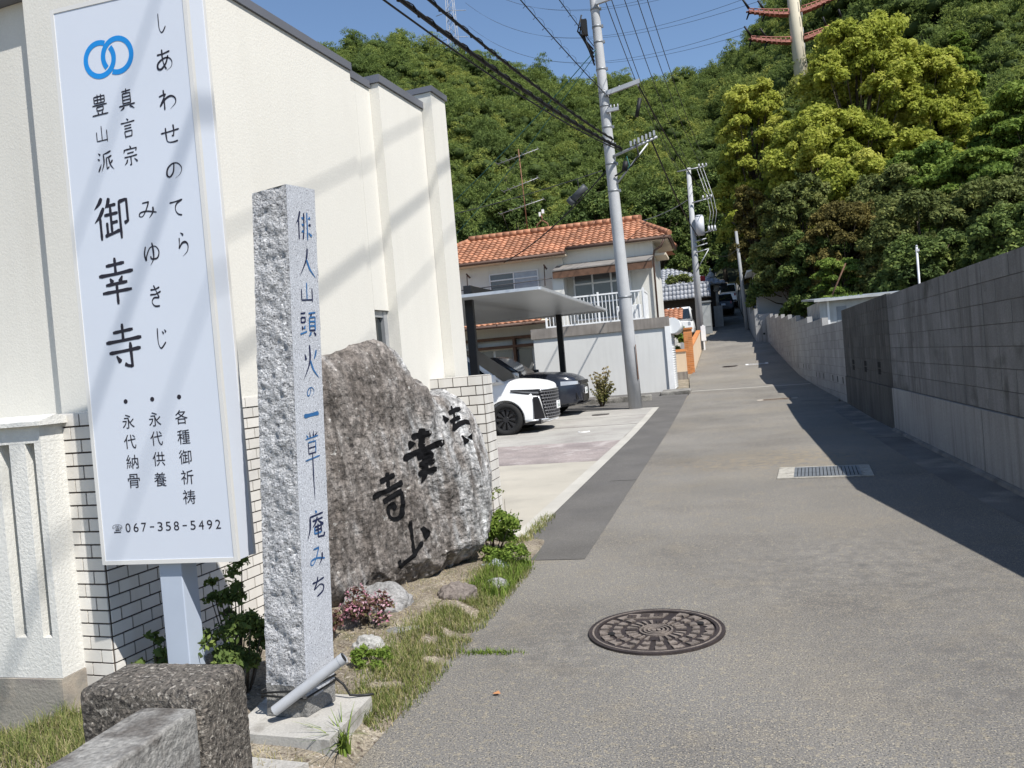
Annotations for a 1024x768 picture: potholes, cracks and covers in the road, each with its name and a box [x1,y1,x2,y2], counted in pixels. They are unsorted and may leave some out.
manhole cover [589,608,726,656]
drain grate [777,464,874,479]
